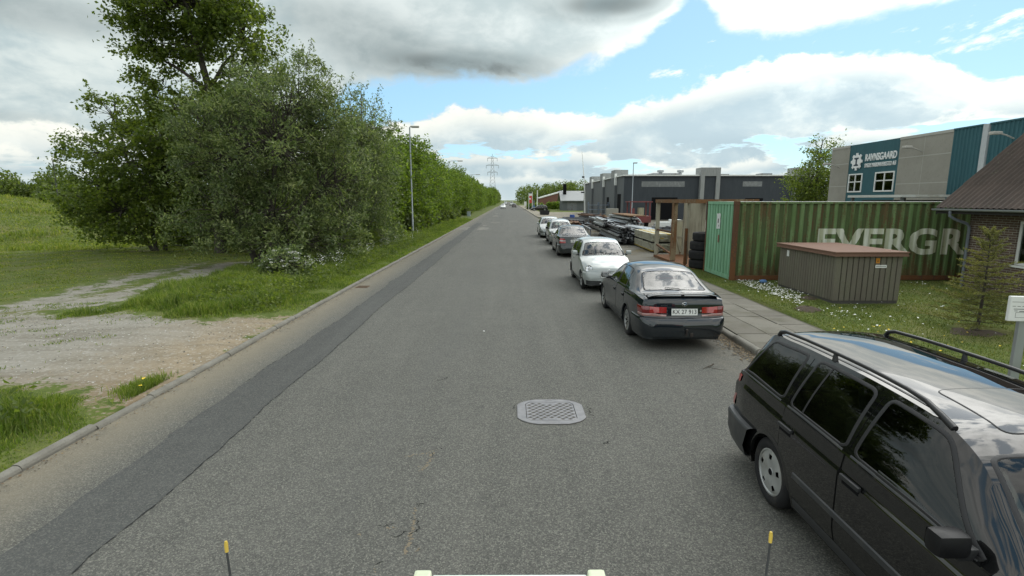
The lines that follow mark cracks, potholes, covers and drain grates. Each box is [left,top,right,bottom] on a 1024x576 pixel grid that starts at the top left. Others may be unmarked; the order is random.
manhole cover [517,399,586,425]
